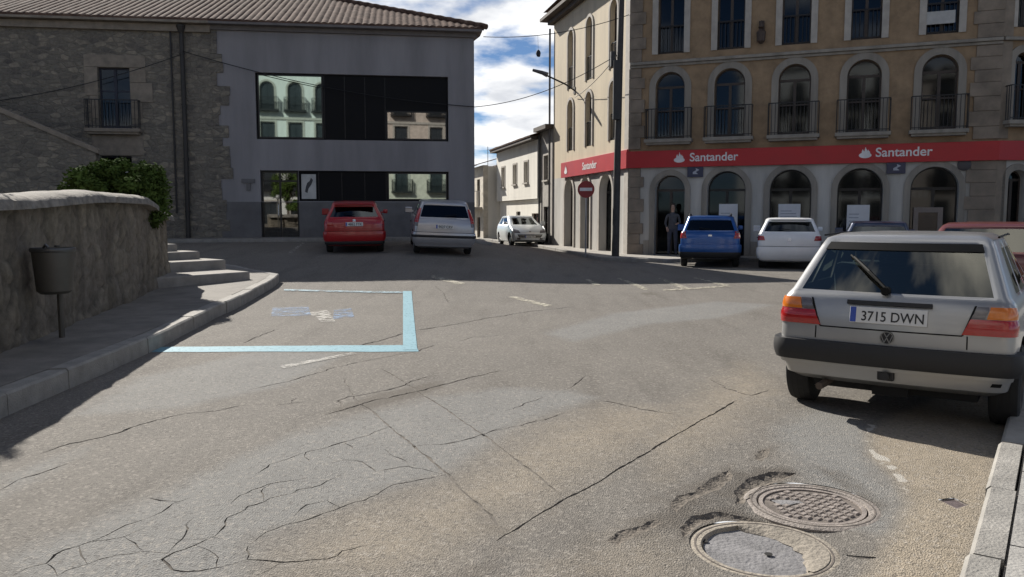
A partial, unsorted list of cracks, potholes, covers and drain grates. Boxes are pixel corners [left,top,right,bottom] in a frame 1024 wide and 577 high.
crack [251,307,567,406]
pothole [670,470,733,513]
pothole [734,472,797,504]
manhole cover [689,521,840,577]
crack [16,413,563,576]
manhole cover [743,484,881,533]
crack [0,405,243,490]
crack [325,370,501,415]
